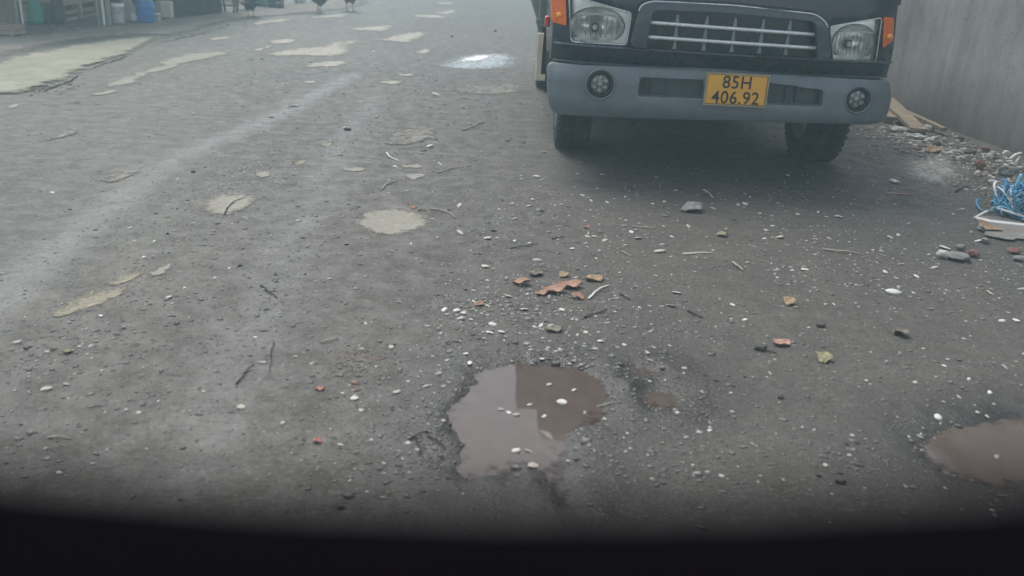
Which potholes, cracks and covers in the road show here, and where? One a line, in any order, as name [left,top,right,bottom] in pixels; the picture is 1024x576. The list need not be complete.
pothole [921,417,1024,482]
pothole [642,392,677,409]
pothole [446,363,609,492]
